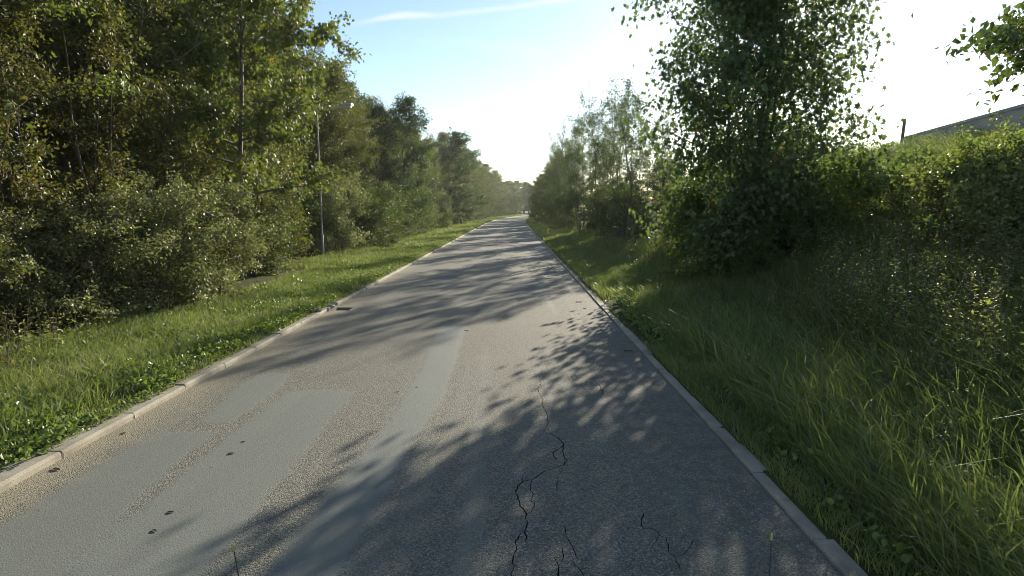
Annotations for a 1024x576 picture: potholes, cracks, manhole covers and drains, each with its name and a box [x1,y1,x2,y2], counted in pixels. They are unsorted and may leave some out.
crack [510,377,567,576]
crack [554,527,584,576]
